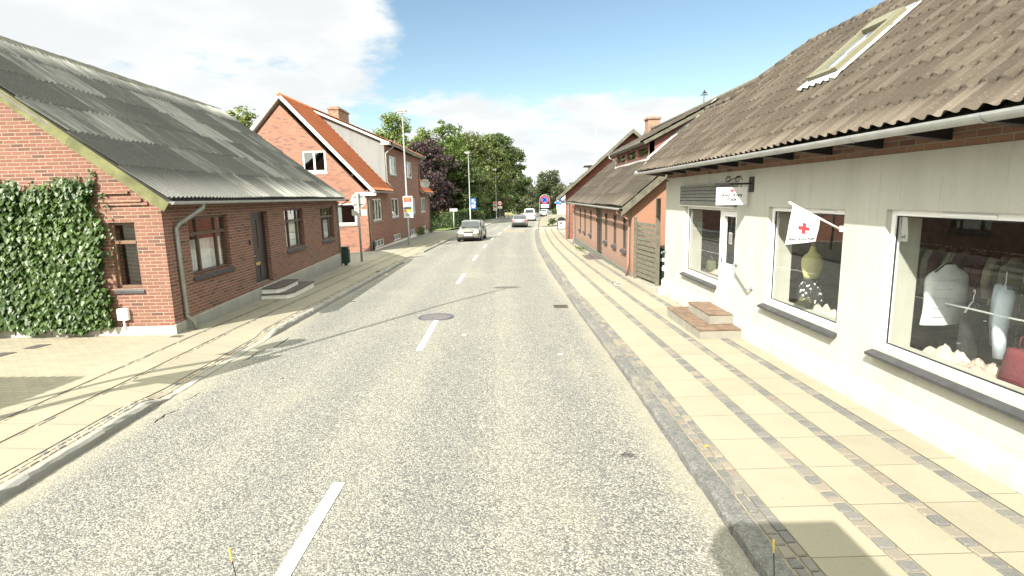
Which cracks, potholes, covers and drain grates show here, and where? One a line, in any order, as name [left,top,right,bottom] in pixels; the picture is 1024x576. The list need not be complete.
manhole cover [418,313,454,321]
